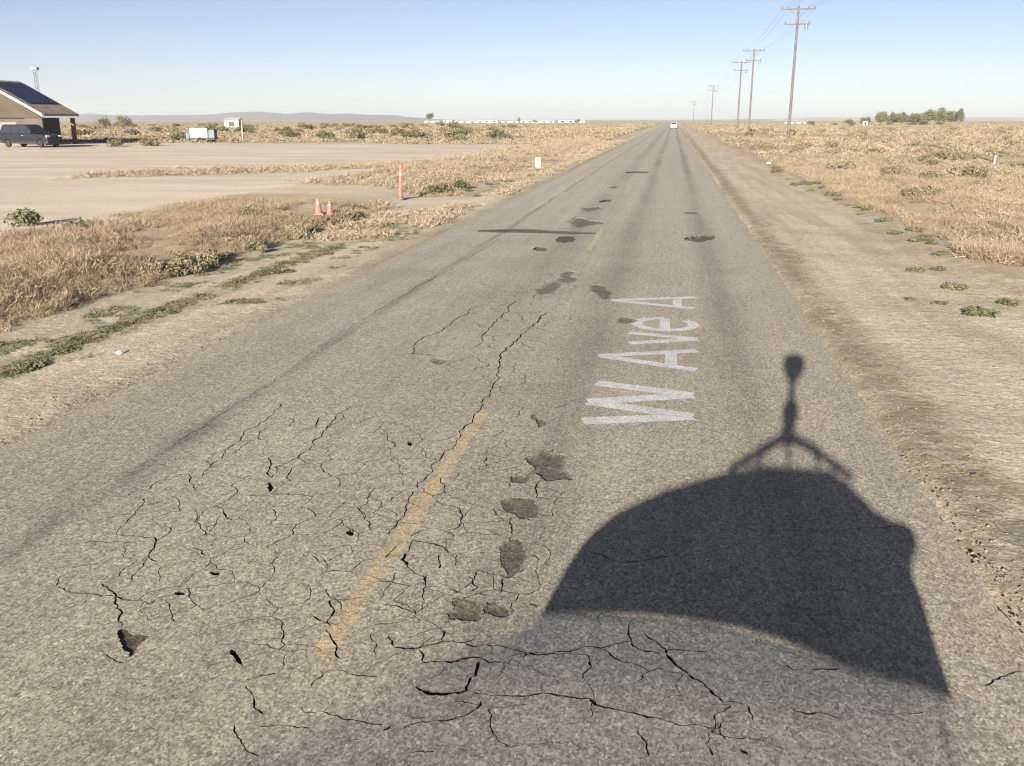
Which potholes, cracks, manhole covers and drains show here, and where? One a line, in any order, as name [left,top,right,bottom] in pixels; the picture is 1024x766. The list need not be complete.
crack [793,708,838,718]
crack [21,266,783,756]
crack [984,671,1022,686]
pothole [117,628,150,657]
